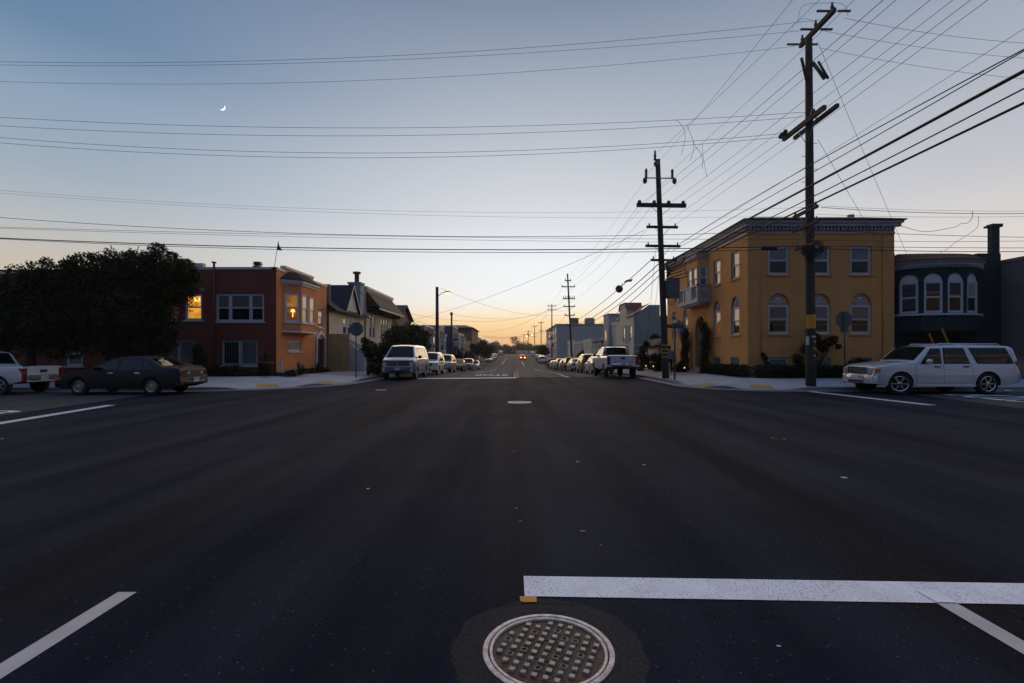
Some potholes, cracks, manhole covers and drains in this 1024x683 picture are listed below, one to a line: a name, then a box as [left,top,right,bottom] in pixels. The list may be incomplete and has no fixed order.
manhole cover [483,614,615,683]
